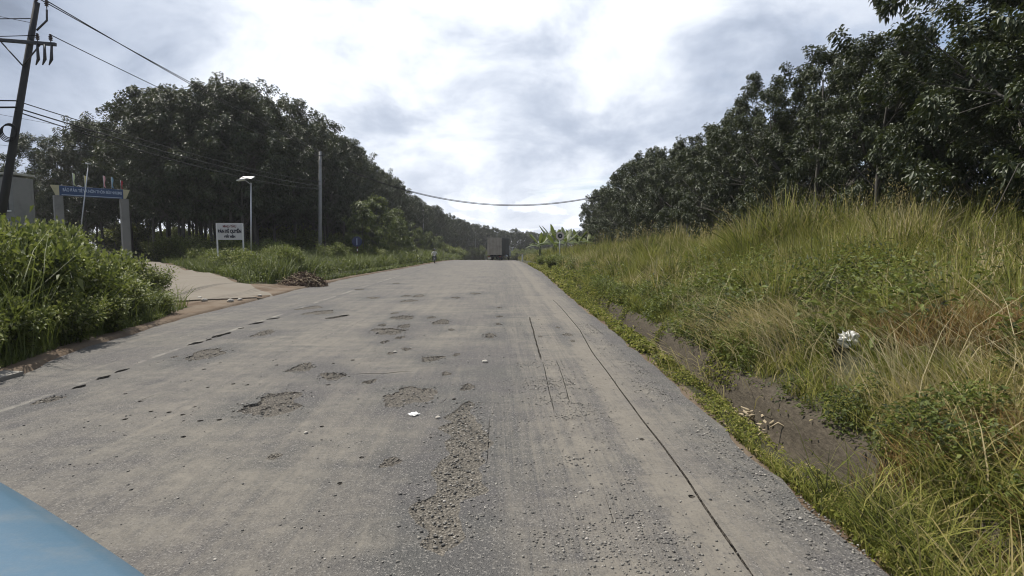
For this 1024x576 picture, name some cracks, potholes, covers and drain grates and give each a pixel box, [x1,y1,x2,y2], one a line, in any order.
pothole [378,456,402,468]
pothole [382,386,438,407]
pothole [408,401,494,556]
pothole [285,362,315,372]
pothole [185,348,226,360]
crack [529,317,570,410]
pothole [238,391,303,417]
